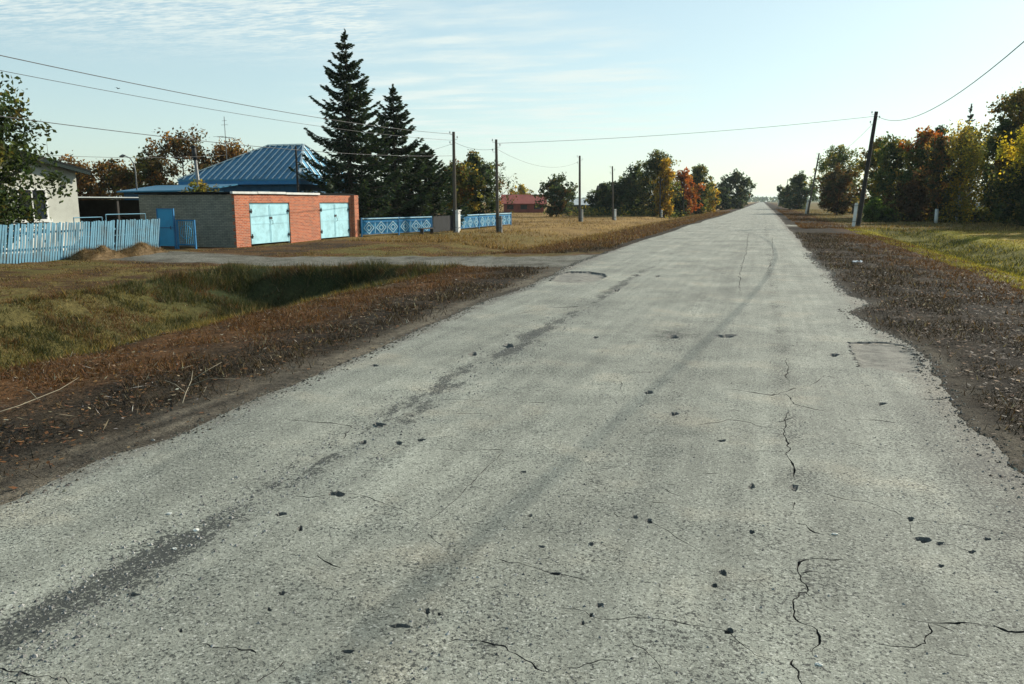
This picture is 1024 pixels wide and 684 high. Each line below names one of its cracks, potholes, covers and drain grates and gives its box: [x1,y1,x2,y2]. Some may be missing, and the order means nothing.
crack [494,557,585,581]
crack [790,558,853,684]
crack [881,618,1024,657]
crack [416,448,502,547]
crack [449,639,544,672]
crack [203,643,256,654]
